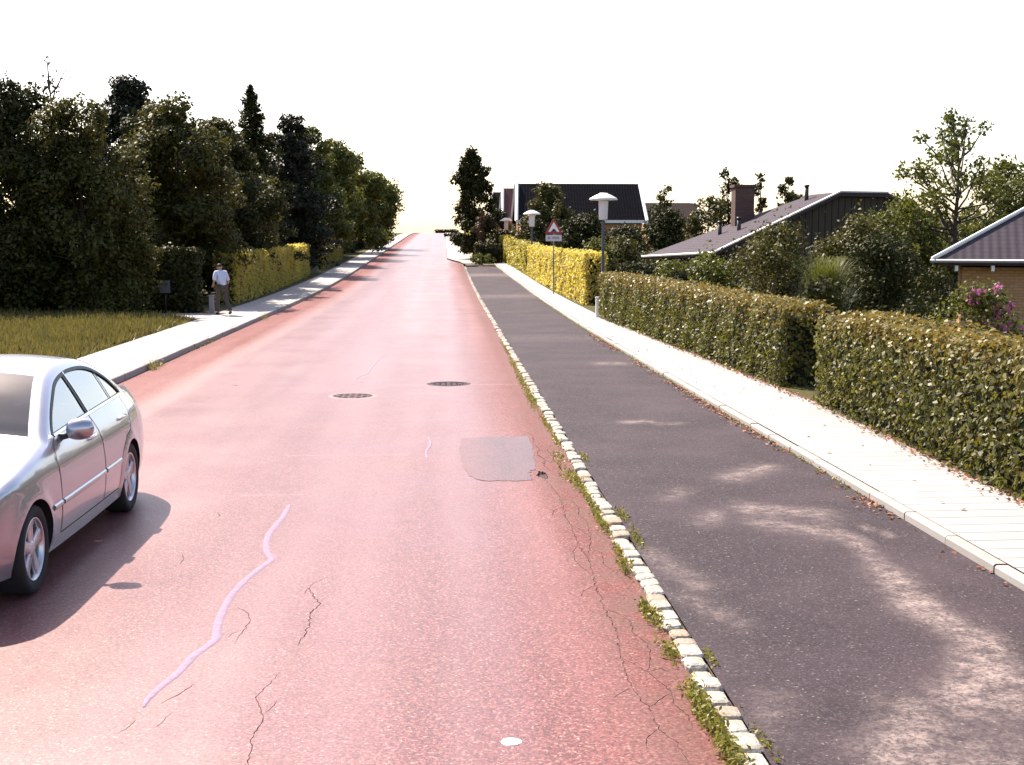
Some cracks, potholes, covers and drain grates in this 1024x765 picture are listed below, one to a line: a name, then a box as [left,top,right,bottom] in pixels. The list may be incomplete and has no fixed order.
crack [298,577,327,646]
crack [247,675,277,765]
